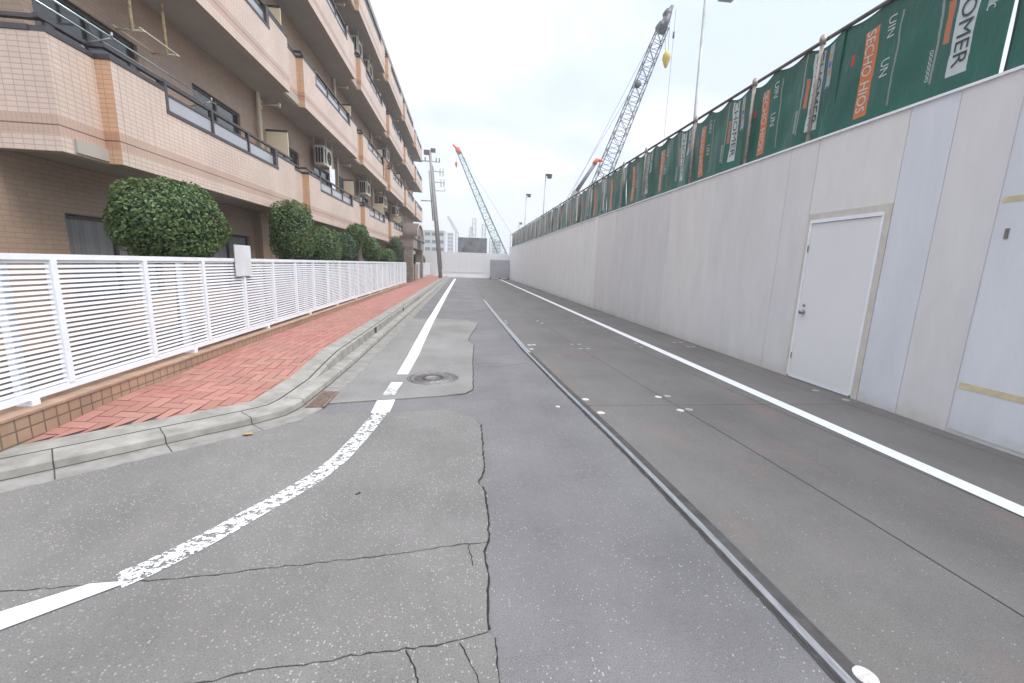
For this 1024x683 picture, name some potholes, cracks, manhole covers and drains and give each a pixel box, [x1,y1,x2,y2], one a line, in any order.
crack [368,422,500,683]
drain grate [305,391,340,408]
manhole cover [407,371,459,385]
